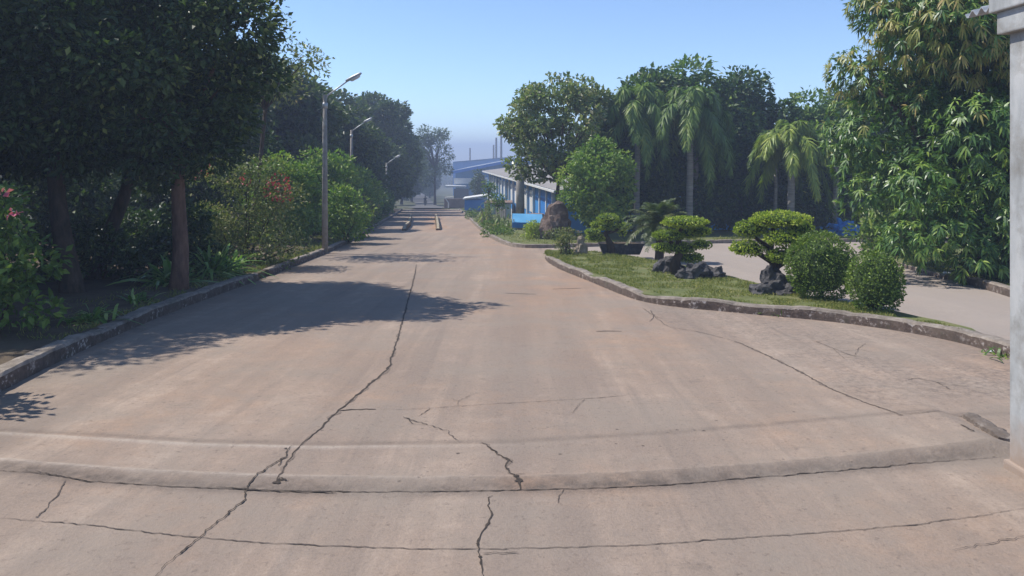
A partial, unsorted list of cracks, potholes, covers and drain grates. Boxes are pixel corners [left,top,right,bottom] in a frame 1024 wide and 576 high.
crack [11,265,1022,576]
